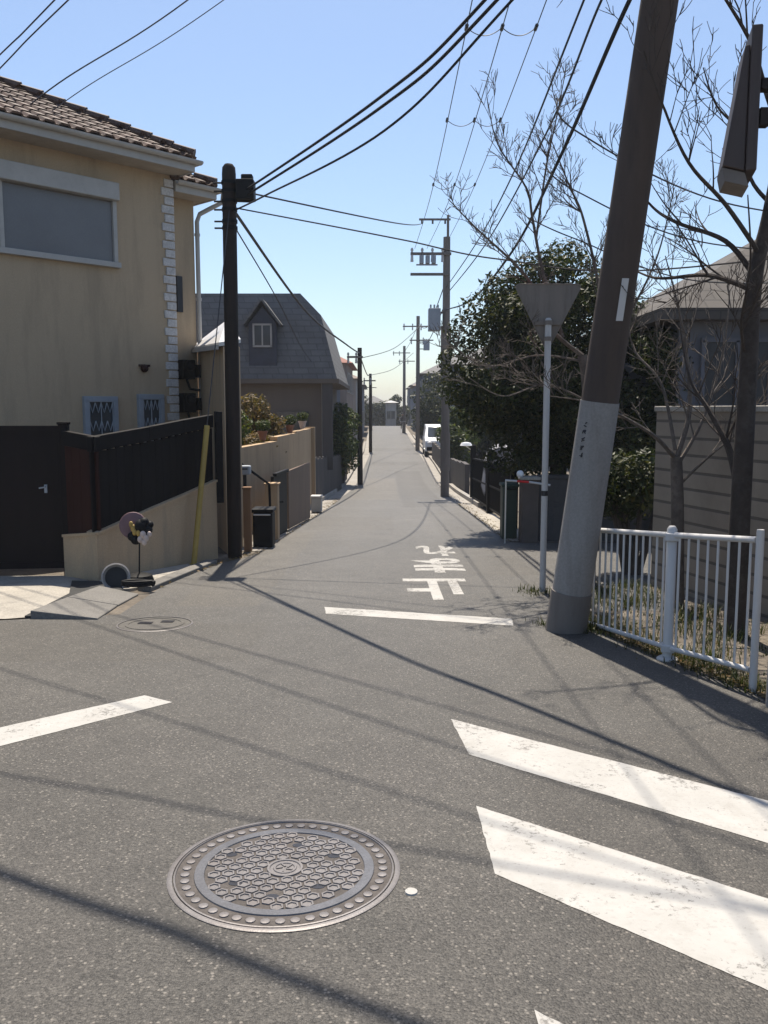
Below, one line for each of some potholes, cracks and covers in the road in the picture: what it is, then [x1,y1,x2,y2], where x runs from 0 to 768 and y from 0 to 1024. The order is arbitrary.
manhole cover [166,819,400,933]
manhole cover [116,616,193,632]
